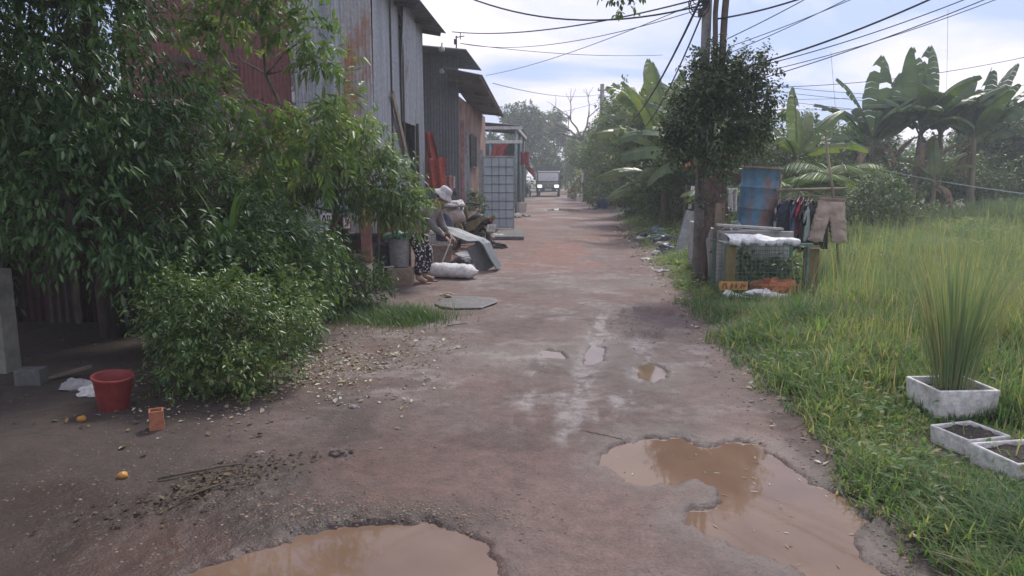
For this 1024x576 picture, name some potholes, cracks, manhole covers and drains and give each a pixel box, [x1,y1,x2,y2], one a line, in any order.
pothole [578,343,610,366]
pothole [581,429,921,576]
pothole [535,348,574,360]
pothole [627,361,675,384]
pothole [155,509,520,576]
